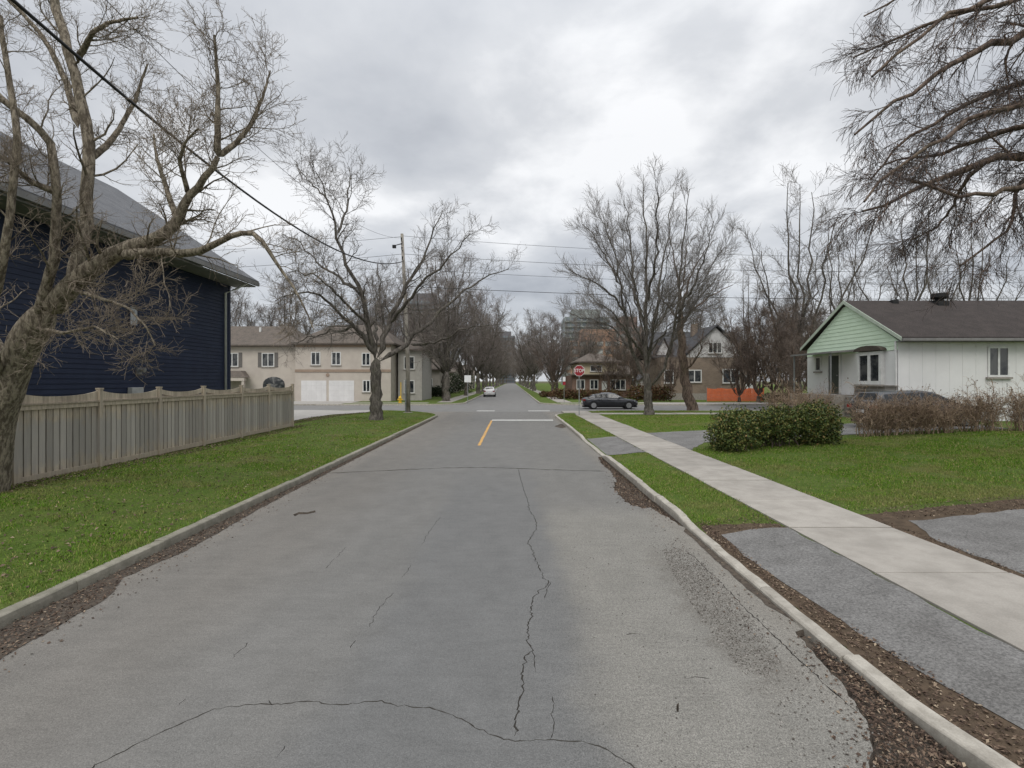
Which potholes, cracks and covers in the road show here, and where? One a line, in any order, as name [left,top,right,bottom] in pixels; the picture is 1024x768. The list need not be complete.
crack [690,554,857,712]
crack [92,467,635,768]
